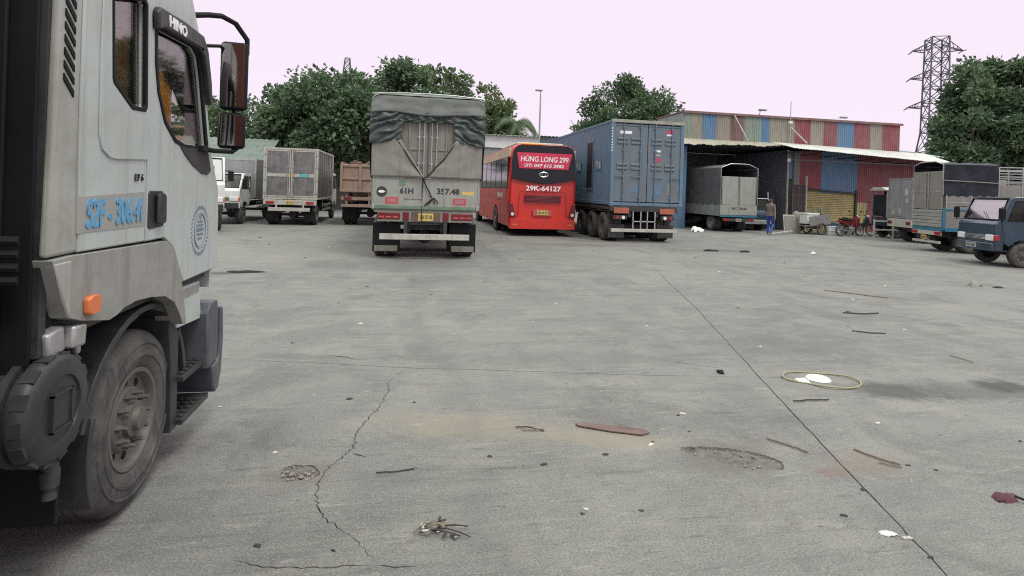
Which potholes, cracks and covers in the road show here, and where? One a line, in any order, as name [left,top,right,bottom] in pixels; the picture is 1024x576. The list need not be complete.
crack [234,372,415,569]
pothole [680,446,784,470]
pothole [280,465,320,482]
